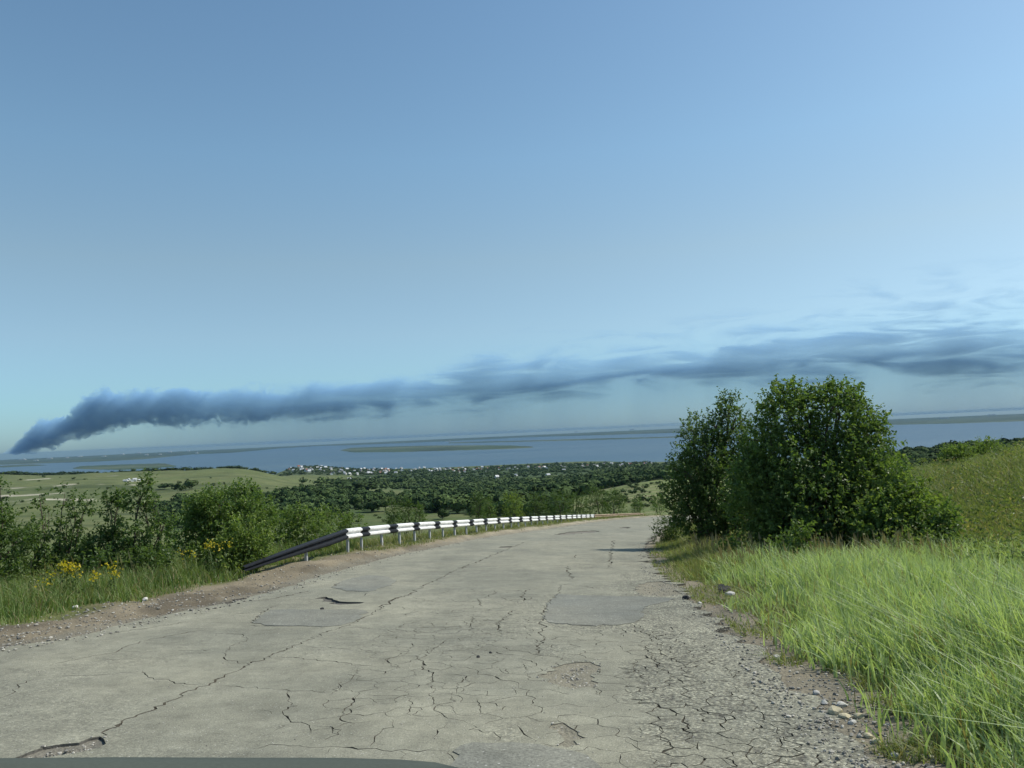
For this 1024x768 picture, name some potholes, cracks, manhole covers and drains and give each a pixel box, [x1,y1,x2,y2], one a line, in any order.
pothole [16,736,106,758]
pothole [538,662,601,689]
crack [245,555,823,768]
pothole [316,597,364,605]
crack [1,591,308,698]
